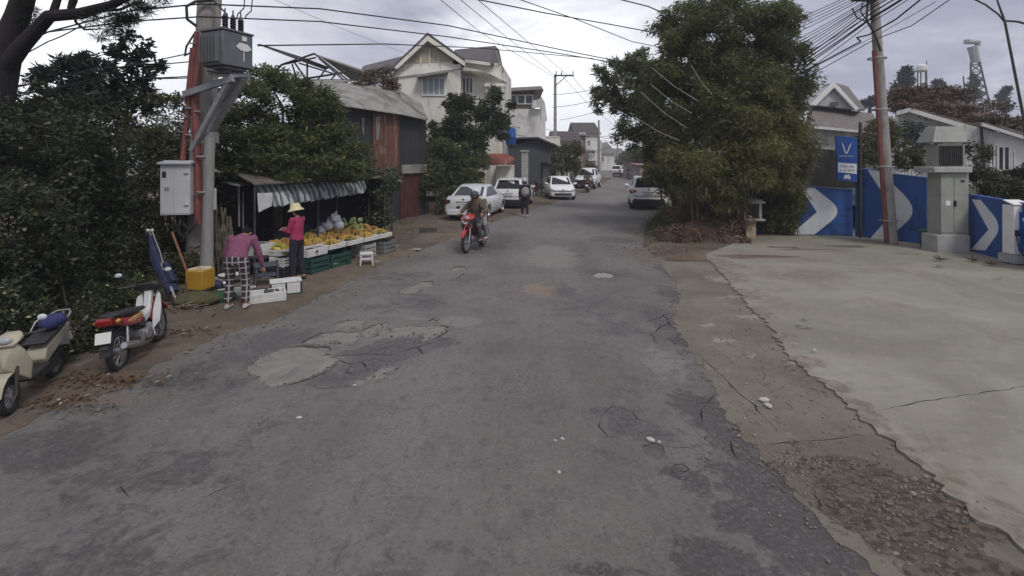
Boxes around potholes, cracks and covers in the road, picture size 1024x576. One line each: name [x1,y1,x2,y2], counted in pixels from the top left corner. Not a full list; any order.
crack [669,357,848,472]
crack [882,386,1023,410]
crack [248,329,453,389]
crack [646,314,672,343]
crack [587,406,657,438]
